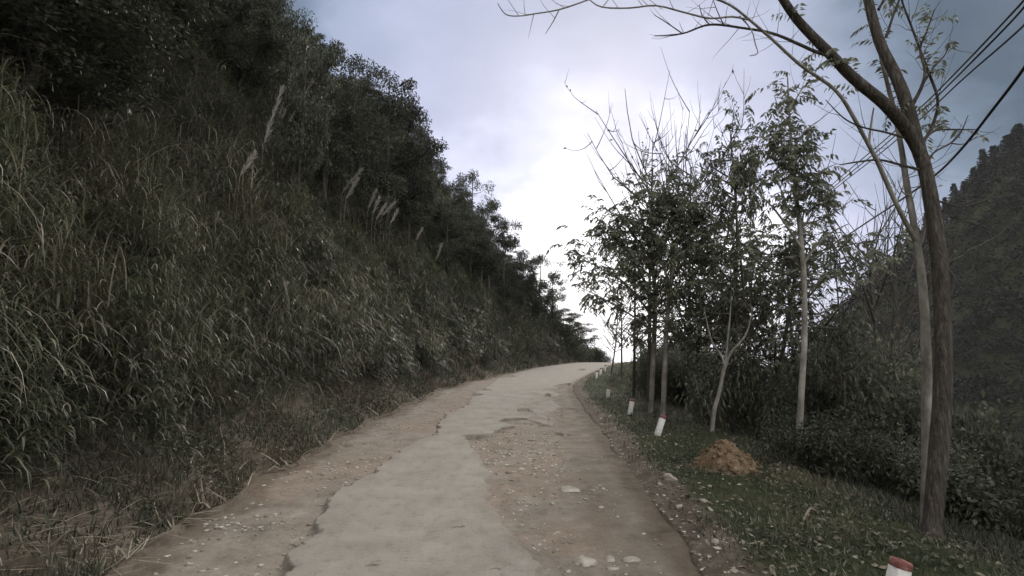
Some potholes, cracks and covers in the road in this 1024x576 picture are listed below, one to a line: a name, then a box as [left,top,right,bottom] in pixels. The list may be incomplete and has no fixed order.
pothole [461,426,572,486]
pothole [499,418,545,429]
pothole [516,407,534,415]
